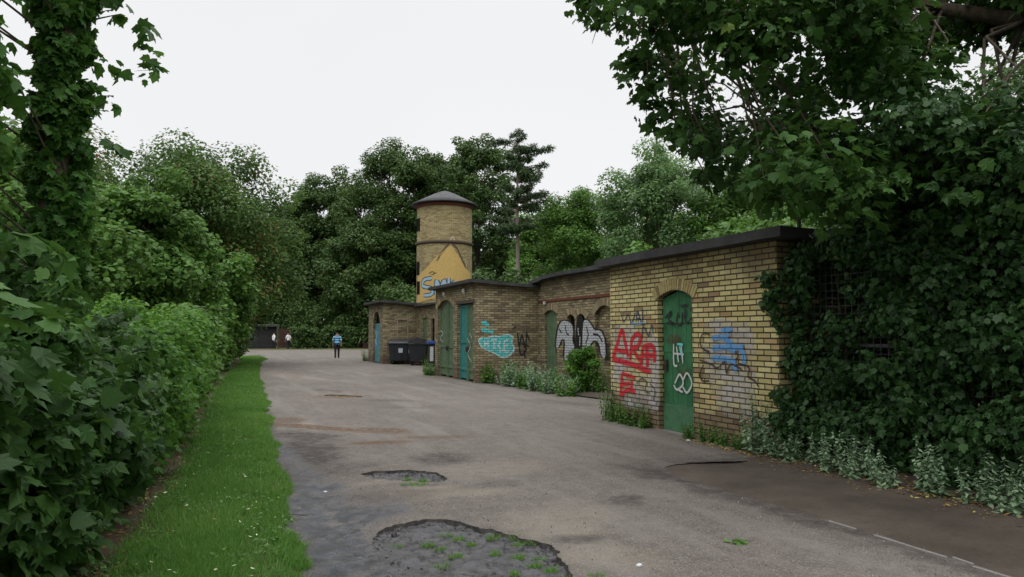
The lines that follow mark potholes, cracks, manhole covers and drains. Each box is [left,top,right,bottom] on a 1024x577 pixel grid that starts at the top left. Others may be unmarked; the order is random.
pothole [372,519,573,577]
pothole [362,470,447,482]
